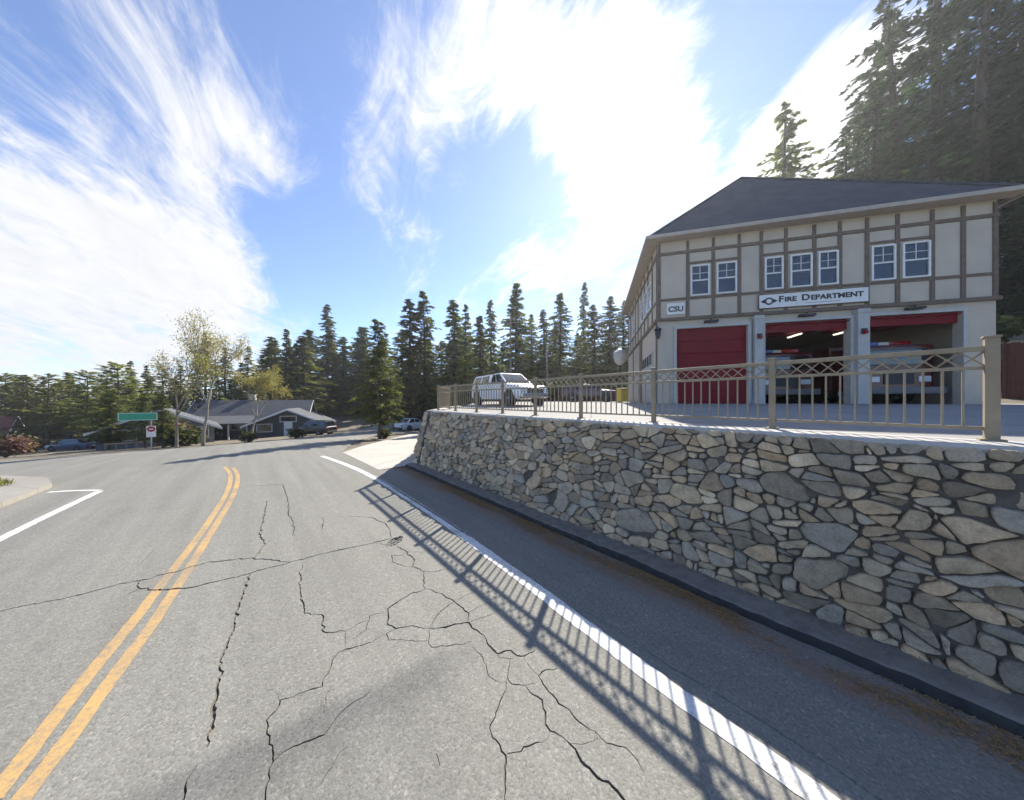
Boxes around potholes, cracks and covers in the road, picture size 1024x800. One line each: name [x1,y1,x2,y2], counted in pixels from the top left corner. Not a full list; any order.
crack [2,484,645,800]
pothole [386,536,403,547]
